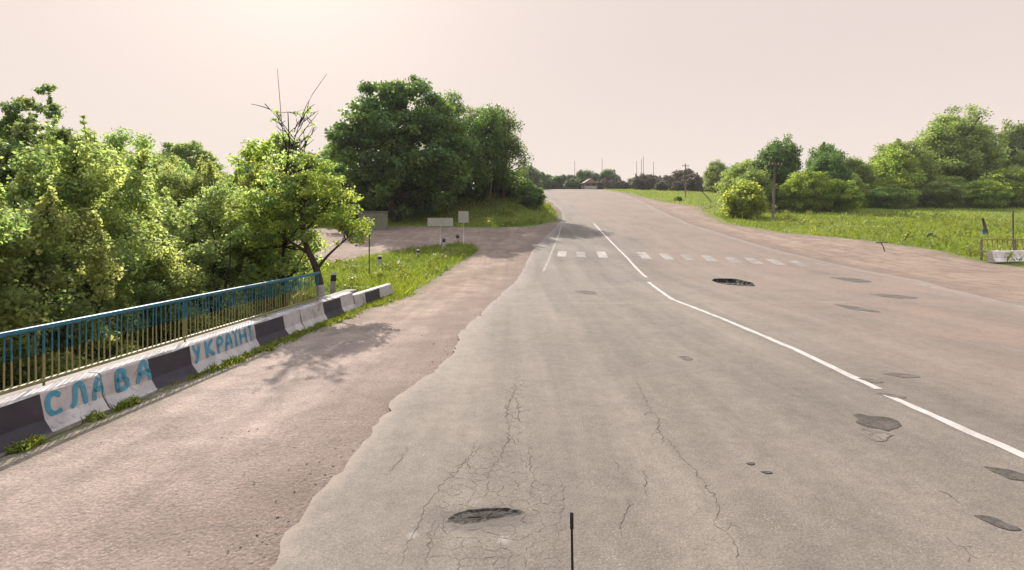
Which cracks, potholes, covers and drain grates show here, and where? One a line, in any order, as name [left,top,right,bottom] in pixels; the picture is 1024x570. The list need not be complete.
crack [635,380,742,564]
pothole [712,278,756,286]
crack [401,370,566,570]
pothole [447,508,525,525]
